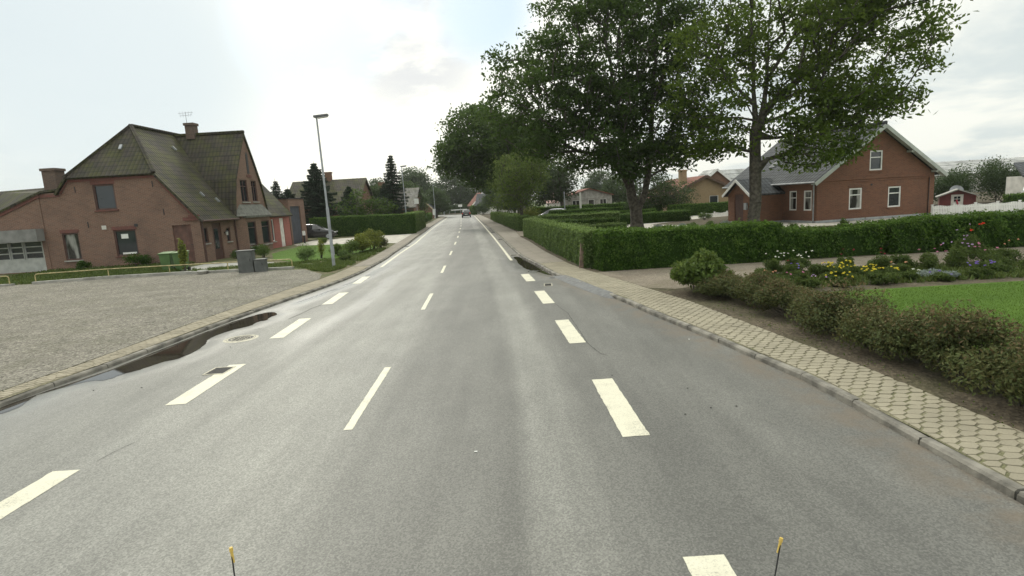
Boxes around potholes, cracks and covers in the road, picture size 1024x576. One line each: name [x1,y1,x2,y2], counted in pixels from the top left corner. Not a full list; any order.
manhole cover [223,335,259,343]
drain grate [202,366,236,375]
